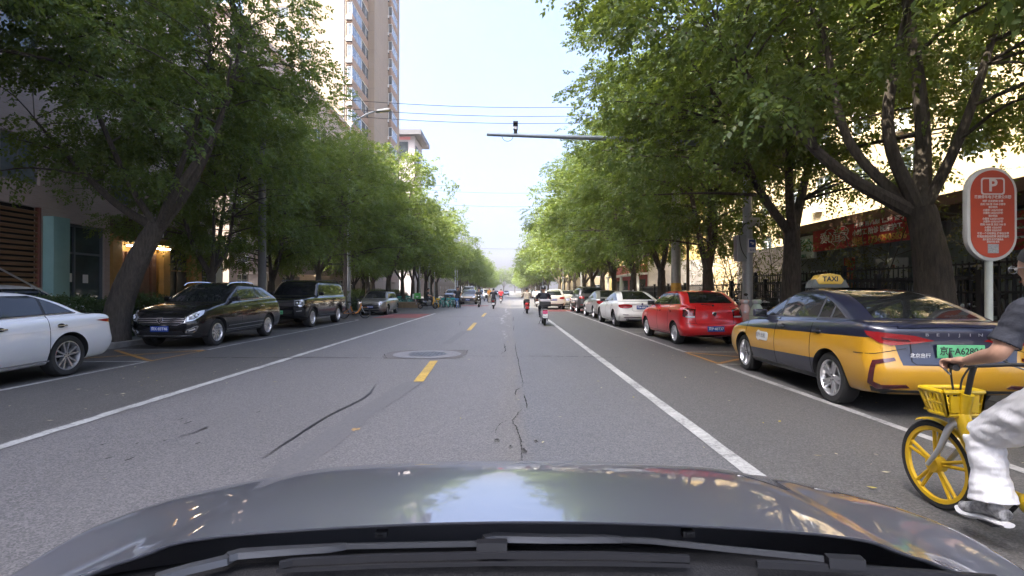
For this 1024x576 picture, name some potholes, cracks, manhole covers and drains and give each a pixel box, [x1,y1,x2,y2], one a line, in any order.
crack [495,388,527,460]
manhole cover [382,350,468,359]
